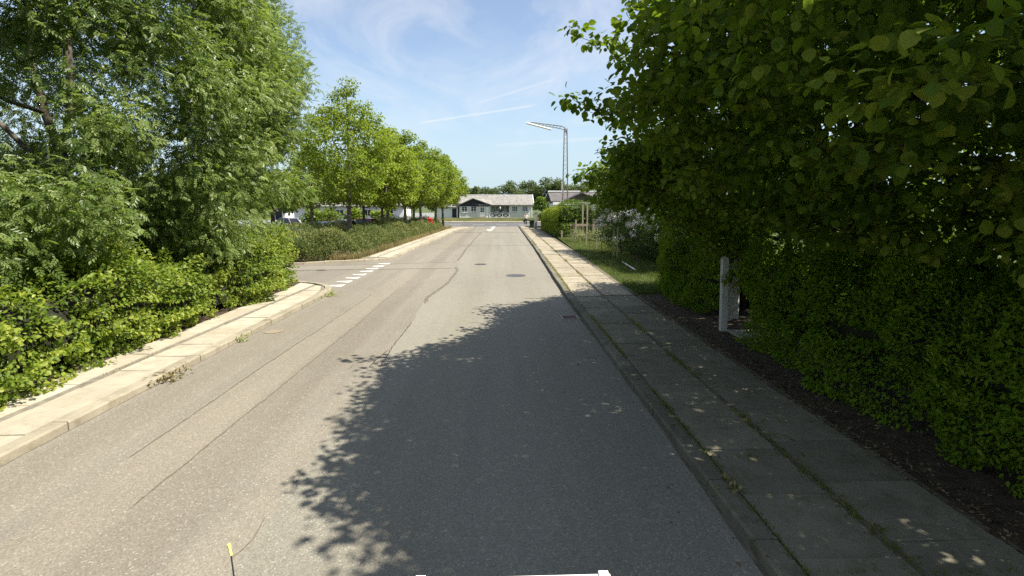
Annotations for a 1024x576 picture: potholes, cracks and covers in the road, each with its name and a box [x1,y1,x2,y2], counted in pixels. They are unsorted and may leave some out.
crack [226,476,301,566]
